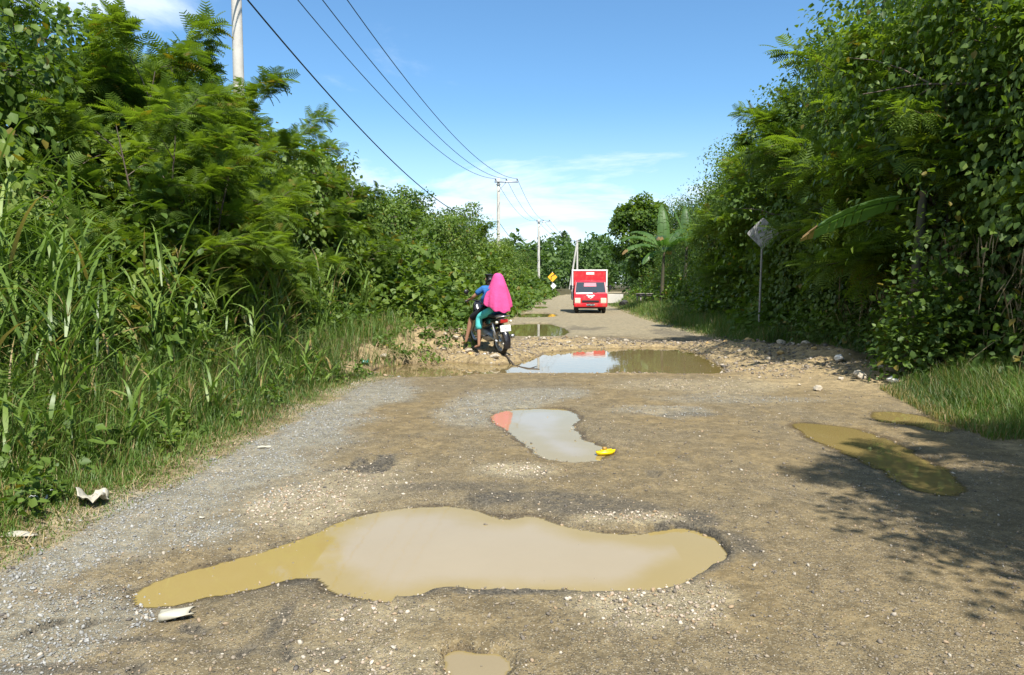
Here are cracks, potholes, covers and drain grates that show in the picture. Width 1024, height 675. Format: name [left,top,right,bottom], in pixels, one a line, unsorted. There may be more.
pothole [366,345,731,377]
pothole [433,639,521,675]
pothole [784,421,989,499]
pothole [860,409,963,433]
pothole [484,406,618,463]
pothole [506,322,573,336]
pothole [121,501,740,610]
